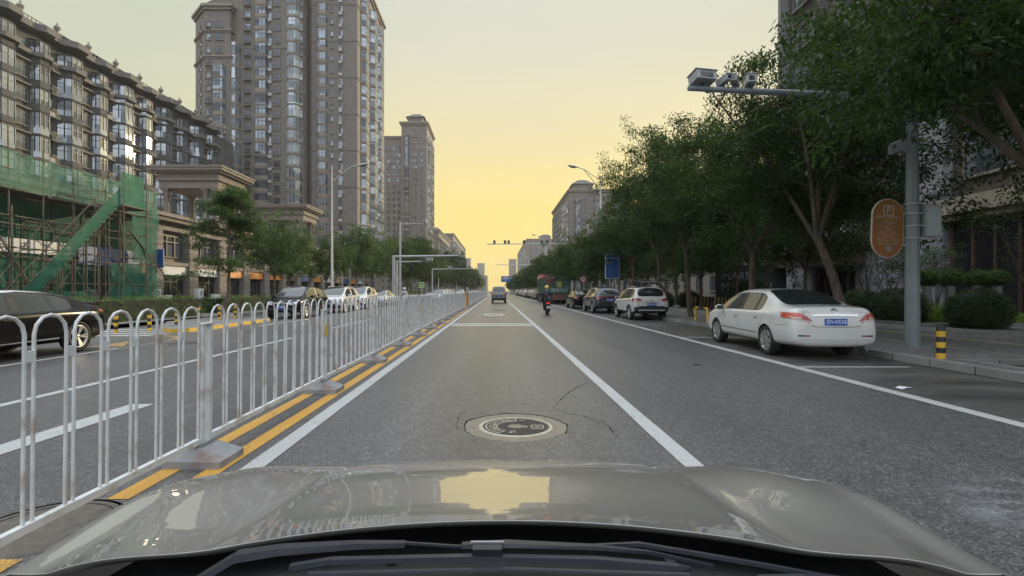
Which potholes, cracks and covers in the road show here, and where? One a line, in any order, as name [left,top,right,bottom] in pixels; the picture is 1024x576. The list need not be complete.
manhole cover [464,413,568,442]
crack [455,382,617,437]
